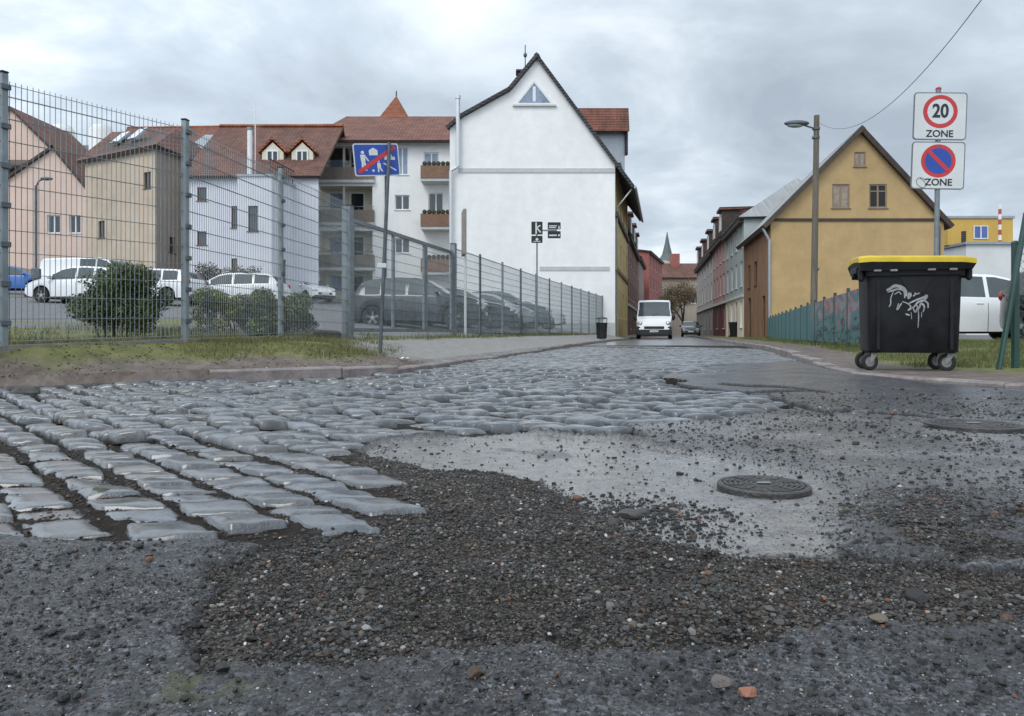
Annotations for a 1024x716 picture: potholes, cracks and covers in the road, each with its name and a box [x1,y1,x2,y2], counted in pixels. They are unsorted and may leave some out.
manhole cover [924,418,1024,434]
pothole [171,449,1024,674]
manhole cover [717,475,812,500]
